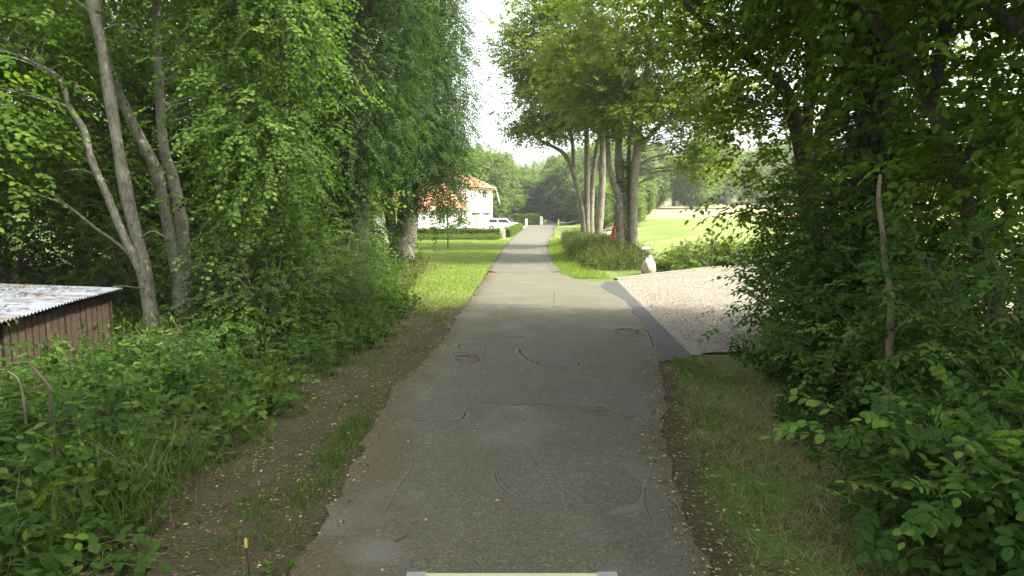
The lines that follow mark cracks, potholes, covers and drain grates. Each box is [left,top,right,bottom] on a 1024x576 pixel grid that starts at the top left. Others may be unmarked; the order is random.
crack [643,487,670,526]
pothole [455,354,483,365]
crack [406,402,619,433]
crack [449,307,617,381]
pothole [614,328,641,338]
